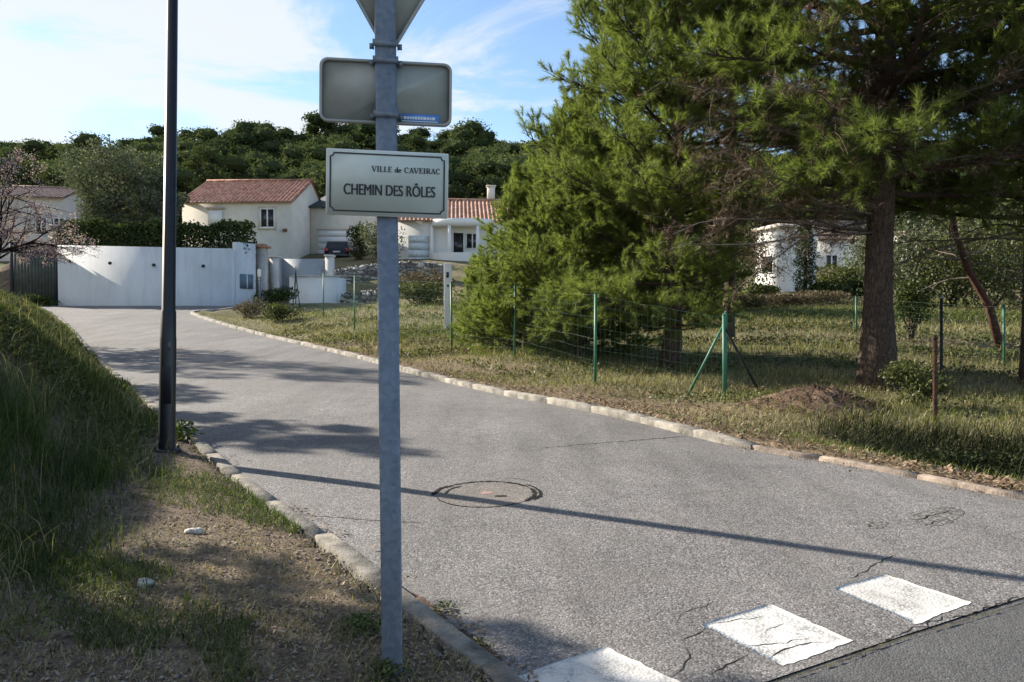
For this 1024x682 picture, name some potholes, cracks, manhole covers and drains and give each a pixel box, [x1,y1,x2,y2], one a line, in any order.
manhole cover [431,481,542,507]
